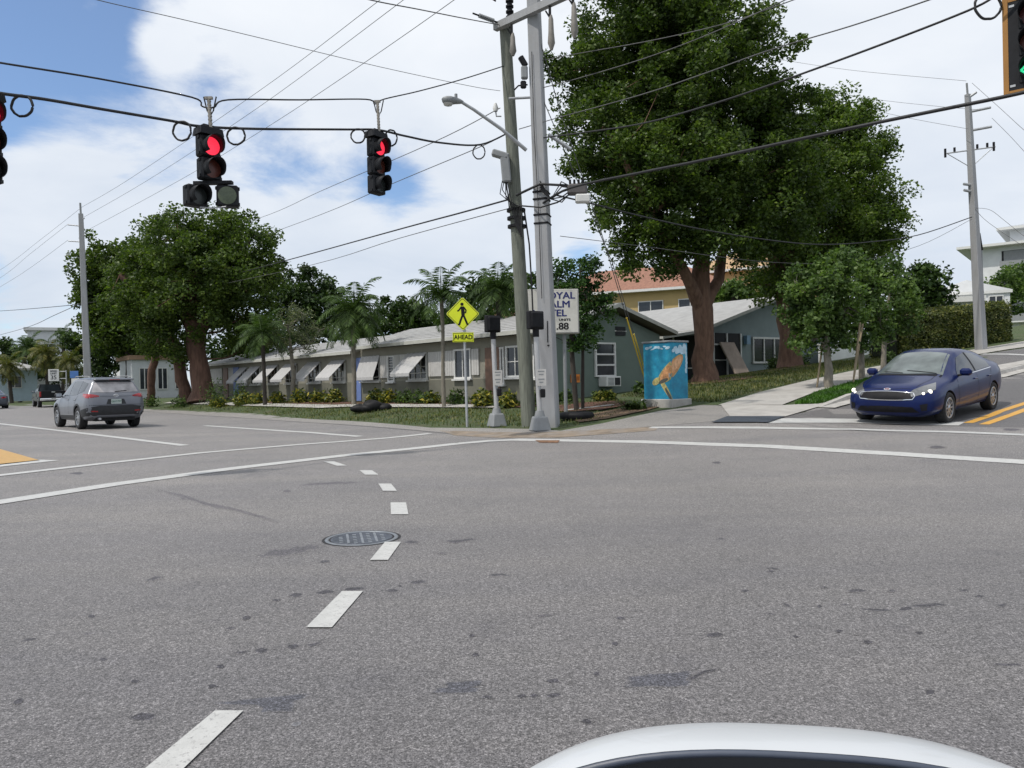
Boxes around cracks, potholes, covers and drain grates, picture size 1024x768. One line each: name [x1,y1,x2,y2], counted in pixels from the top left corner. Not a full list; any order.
manhole cover [322,531,401,547]
